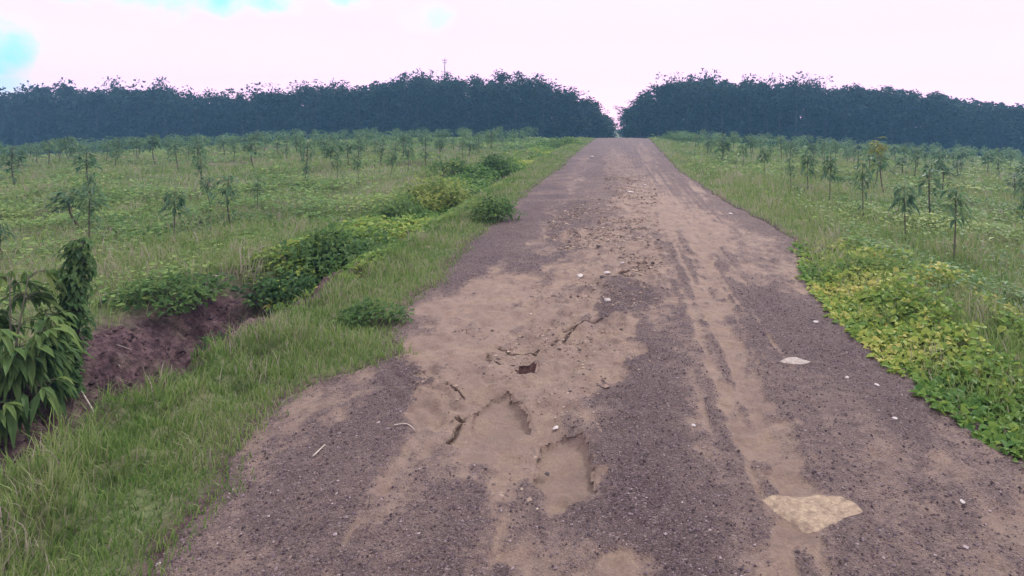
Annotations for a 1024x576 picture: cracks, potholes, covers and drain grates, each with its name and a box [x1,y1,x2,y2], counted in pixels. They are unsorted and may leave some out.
crack [446,381,479,445]
pothole [508,360,543,378]
pothole [521,424,608,509]
crack [486,318,603,366]
pothole [459,383,542,451]
